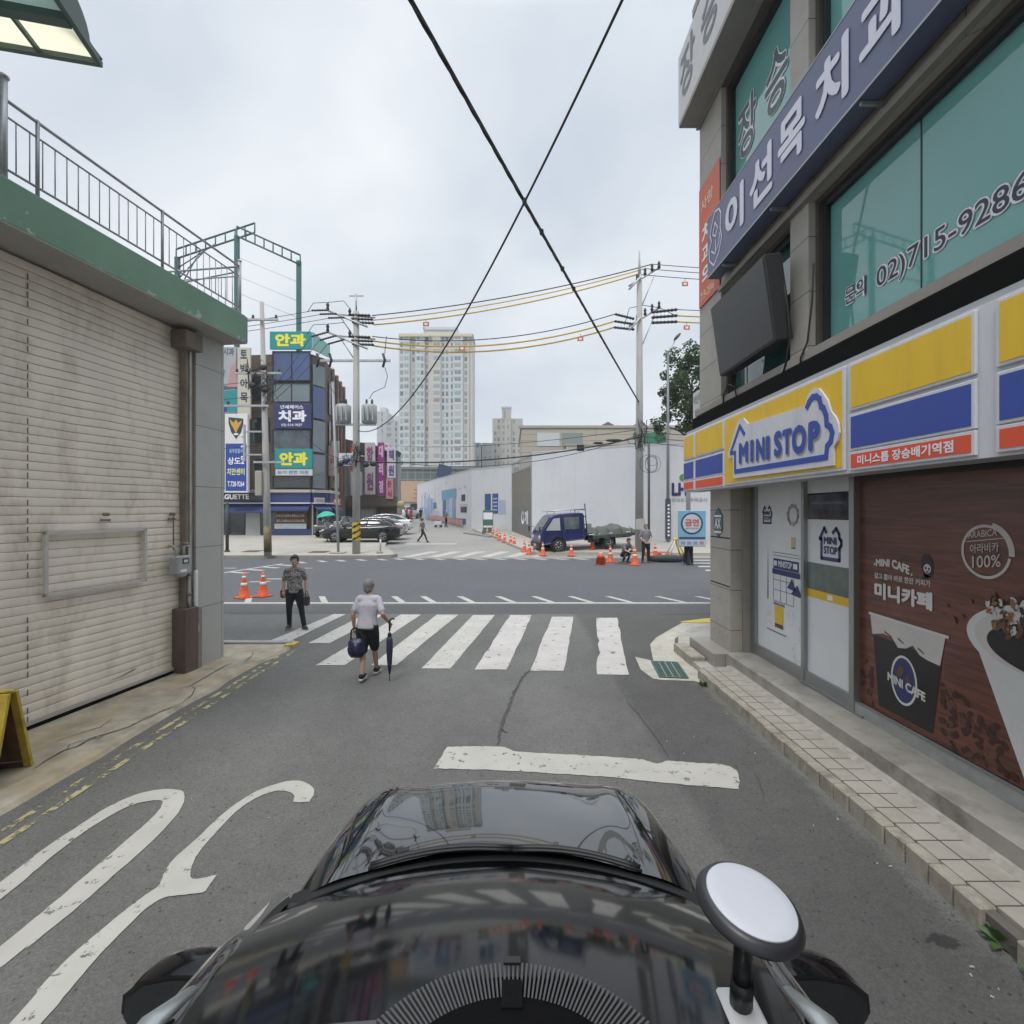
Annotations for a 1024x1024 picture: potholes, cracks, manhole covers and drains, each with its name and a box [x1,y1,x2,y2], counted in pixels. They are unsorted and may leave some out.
drain grate [651,661,689,679]
crack [497,669,533,744]
